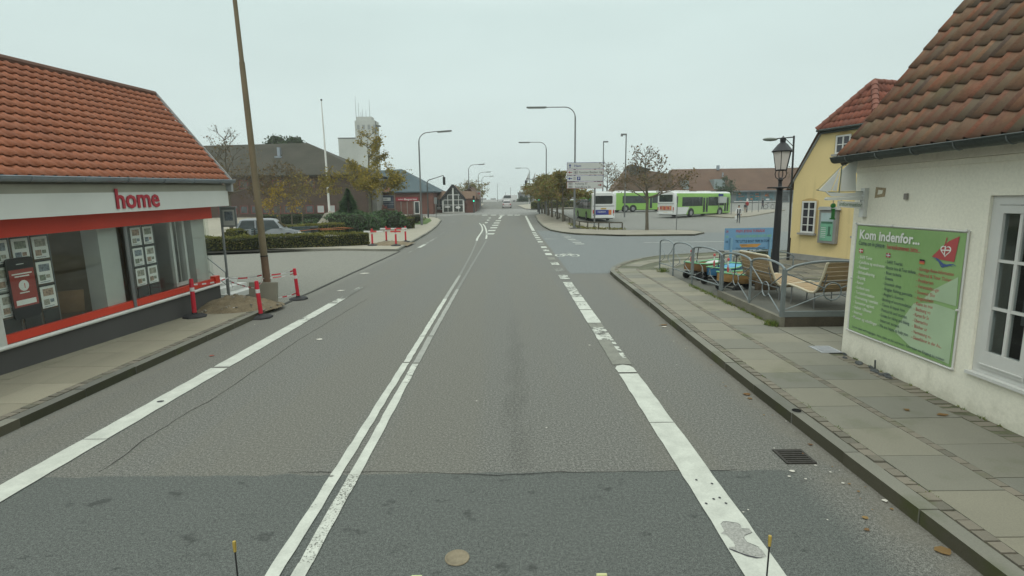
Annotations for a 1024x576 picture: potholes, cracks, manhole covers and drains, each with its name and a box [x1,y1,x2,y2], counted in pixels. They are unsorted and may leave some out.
crack [99,298,368,472]
drain grate [772,449,817,464]
manhole cover [445,549,470,566]
